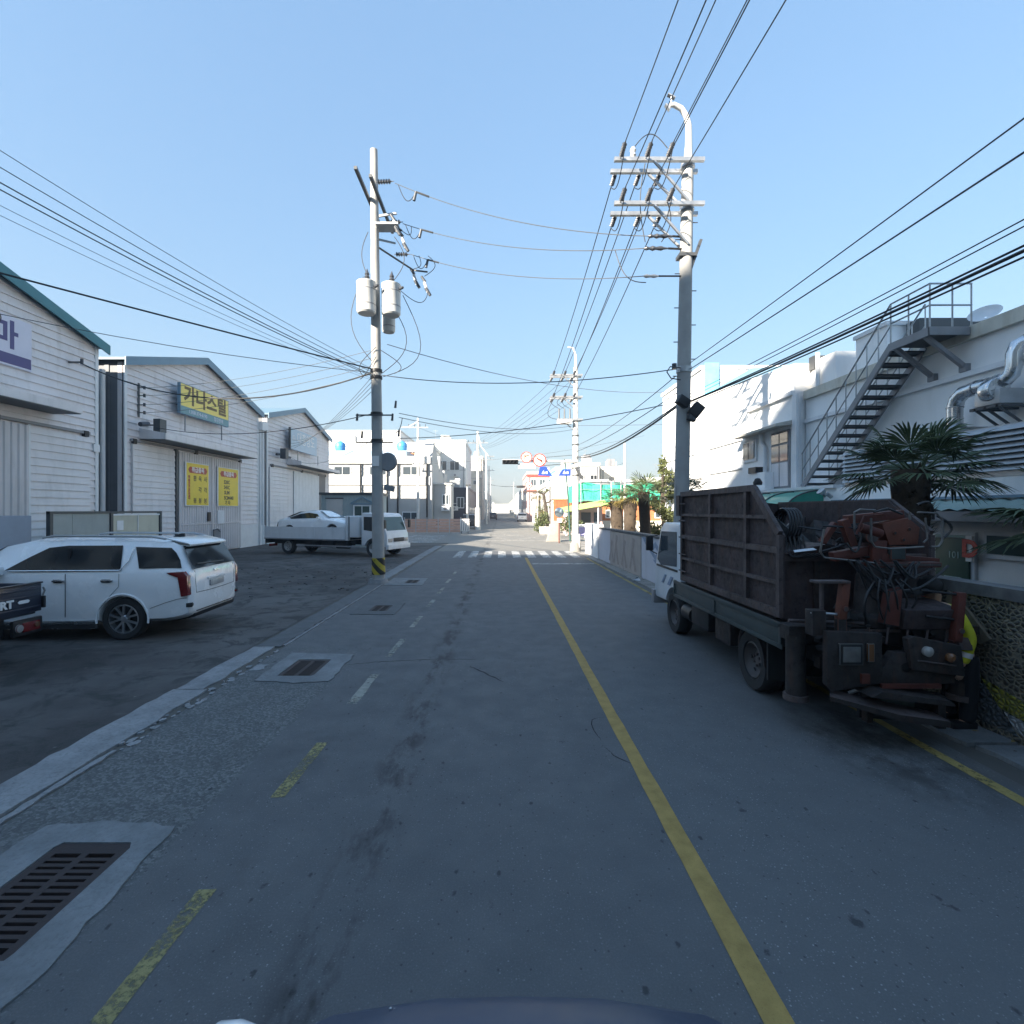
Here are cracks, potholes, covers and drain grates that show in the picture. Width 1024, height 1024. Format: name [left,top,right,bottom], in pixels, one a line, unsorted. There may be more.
drain grate [254,653,354,684]
drain grate [350,602,405,615]
drain grate [384,578,428,586]
crack [346,659,501,681]
drain grate [0,820,175,1011]
